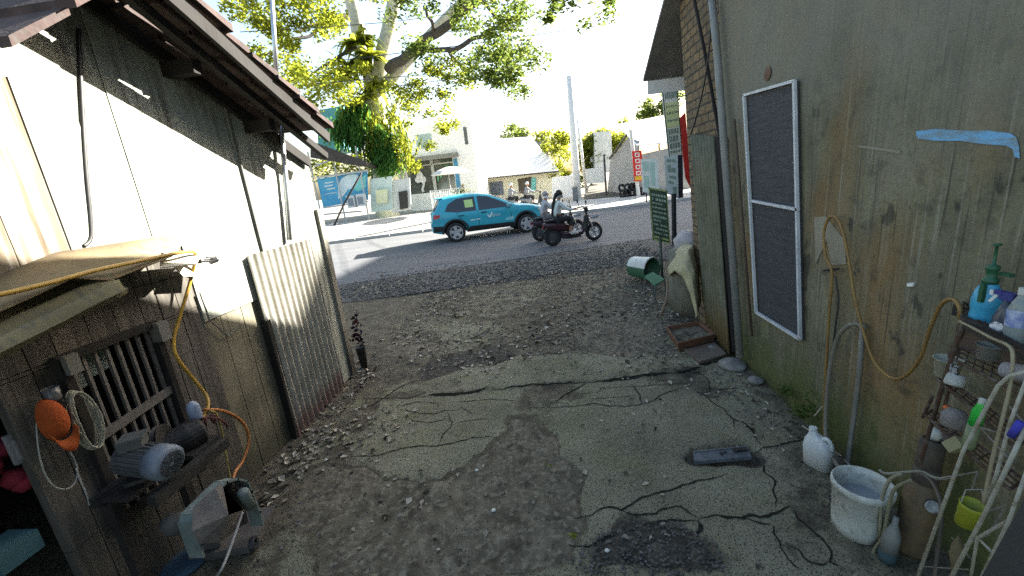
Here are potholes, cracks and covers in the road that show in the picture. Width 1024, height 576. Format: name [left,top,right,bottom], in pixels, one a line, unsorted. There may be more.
crack [355,380,515,442]
crack [532,361,843,569]
pothole [593,518,719,571]
